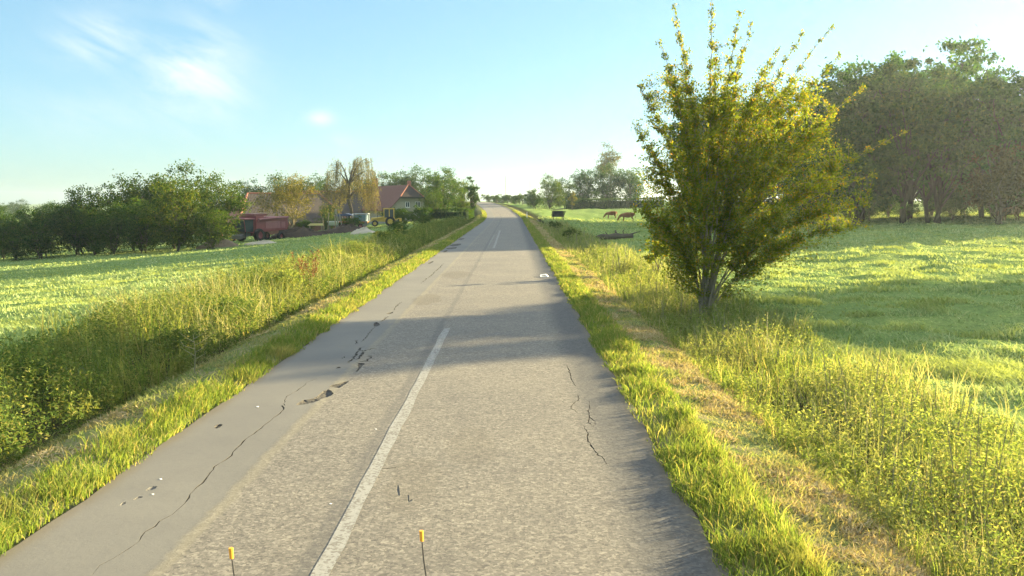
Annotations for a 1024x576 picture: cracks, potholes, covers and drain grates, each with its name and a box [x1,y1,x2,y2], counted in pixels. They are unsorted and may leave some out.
crack [93,302,402,574]
crack [567,366,605,460]
pothole [296,389,333,405]
